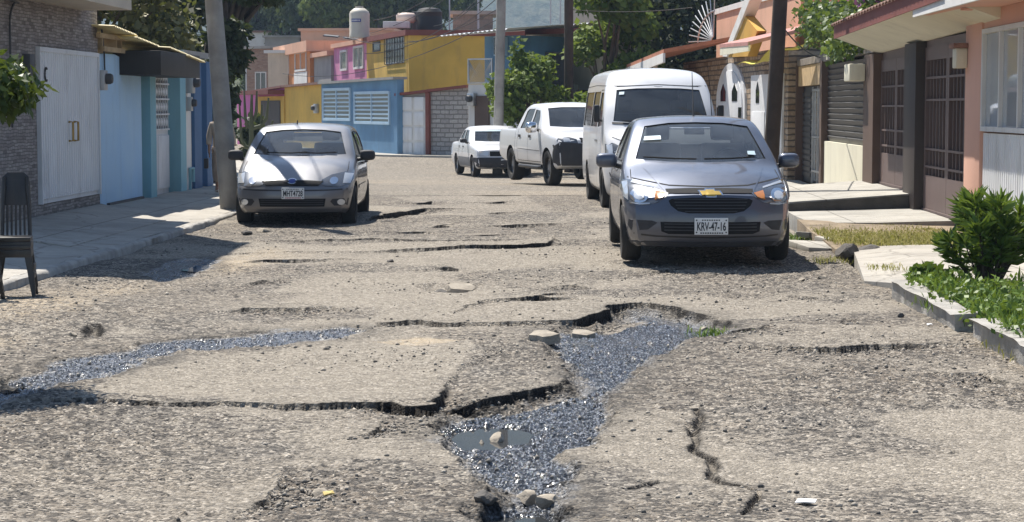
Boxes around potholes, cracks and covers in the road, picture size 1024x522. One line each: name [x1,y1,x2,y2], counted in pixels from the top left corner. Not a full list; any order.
crack [0,266,1024,444]
pothole [425,308,743,522]
pothole [0,323,373,407]
crack [659,407,764,515]
crack [199,195,606,288]
